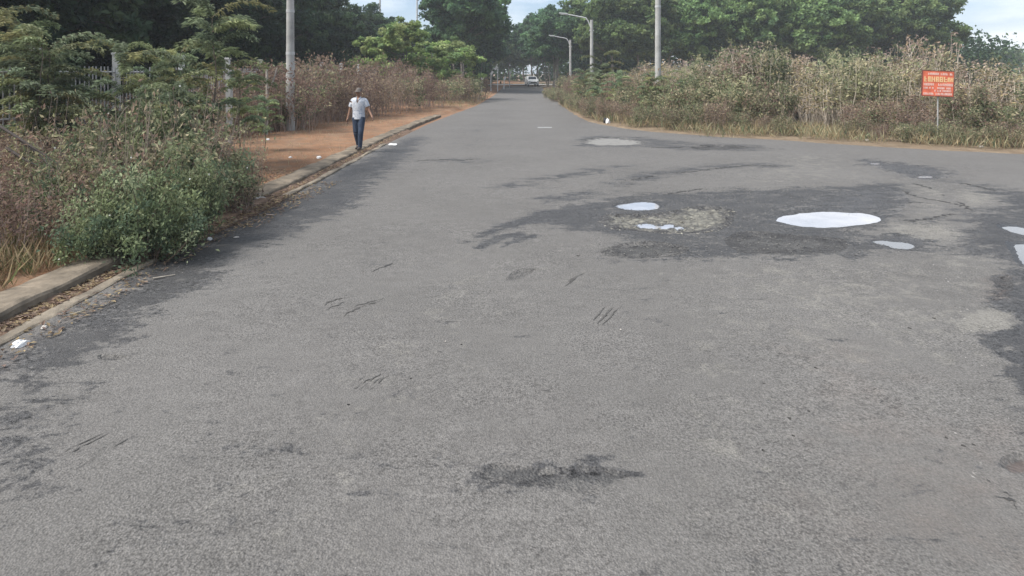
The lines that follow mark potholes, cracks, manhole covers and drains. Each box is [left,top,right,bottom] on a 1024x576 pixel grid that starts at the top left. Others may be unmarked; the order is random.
pothole [995,216,1024,271]
pothole [612,199,665,211]
crack [902,183,996,221]
pothole [860,233,930,251]
pothole [599,206,736,234]
